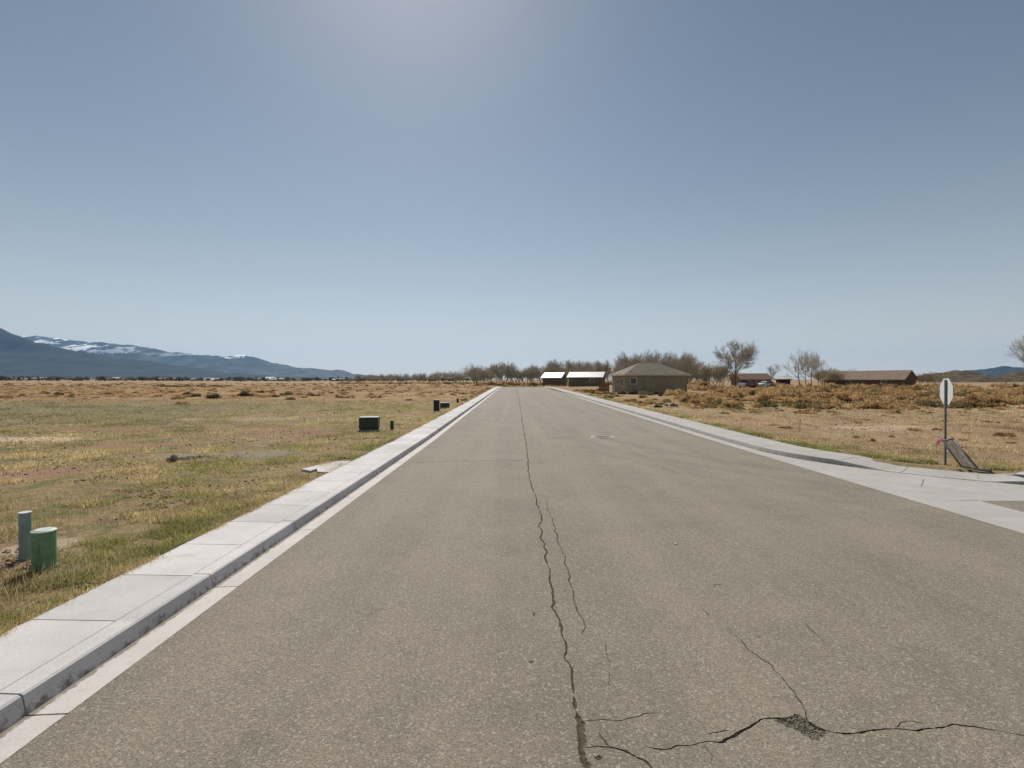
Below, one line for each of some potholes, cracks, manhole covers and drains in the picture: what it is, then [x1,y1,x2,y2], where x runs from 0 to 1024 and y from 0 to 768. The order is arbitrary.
crack [517,394,1024,768]
pothole [775,714,828,741]
